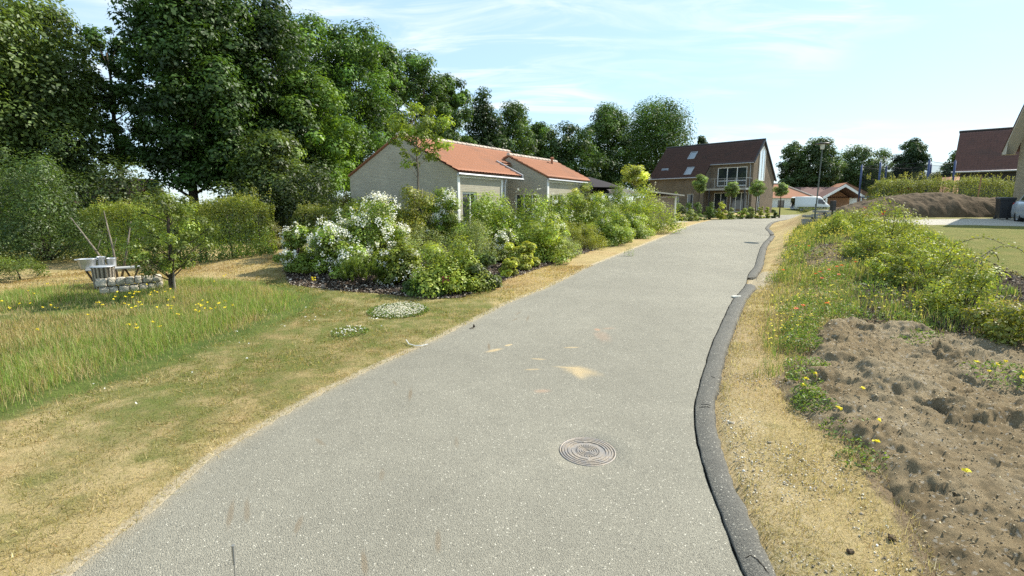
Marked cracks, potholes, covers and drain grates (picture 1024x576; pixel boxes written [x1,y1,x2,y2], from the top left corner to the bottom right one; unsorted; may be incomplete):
manhole cover [559,437,616,467]
